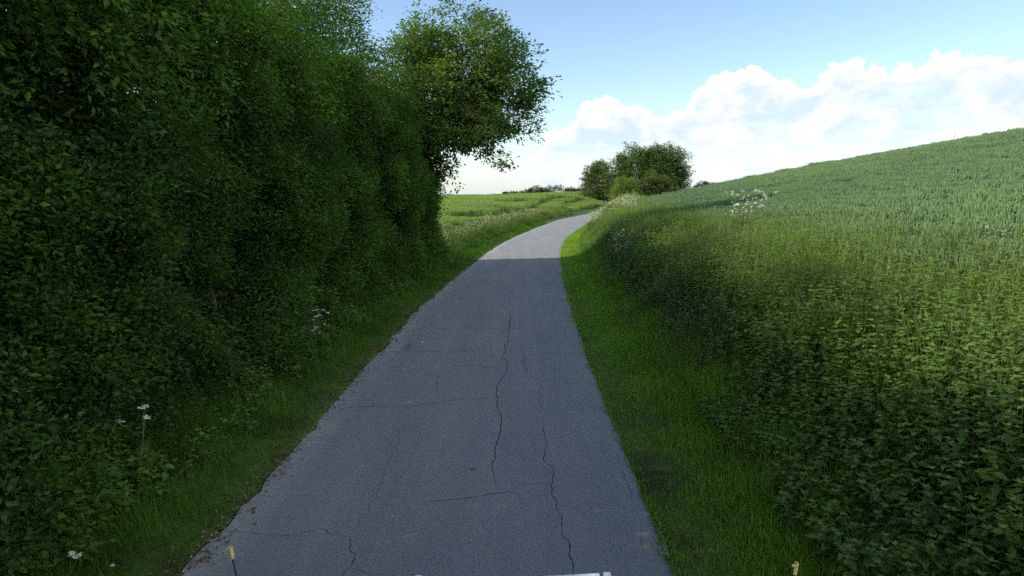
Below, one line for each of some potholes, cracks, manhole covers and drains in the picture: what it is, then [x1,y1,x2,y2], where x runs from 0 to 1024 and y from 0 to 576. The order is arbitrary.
crack [348,304,574,571]
crack [219,438,409,576]
